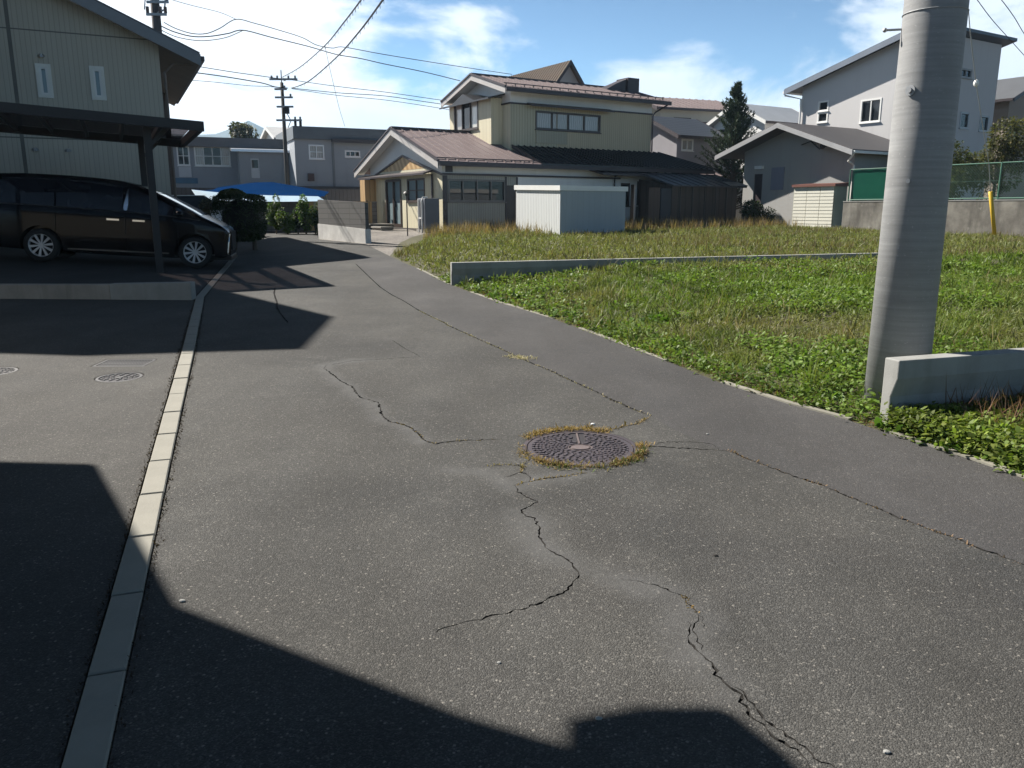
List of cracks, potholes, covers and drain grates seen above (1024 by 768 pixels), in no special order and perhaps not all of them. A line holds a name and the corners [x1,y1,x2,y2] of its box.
drain grate [92,359,157,367]
crack [326,341,494,444]
manhole cover [523,430,638,466]
crack [436,463,580,632]
crack [274,288,288,323]
crack [633,580,835,768]
